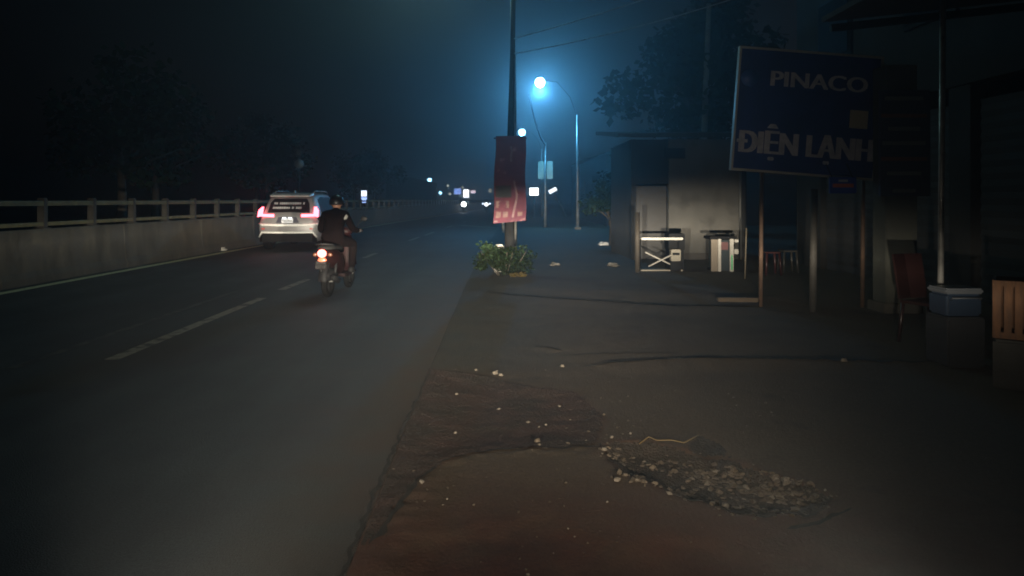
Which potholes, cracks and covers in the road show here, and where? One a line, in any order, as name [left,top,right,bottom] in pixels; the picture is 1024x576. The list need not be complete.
crack [543,346,931,366]
pothole [598,439,834,518]
